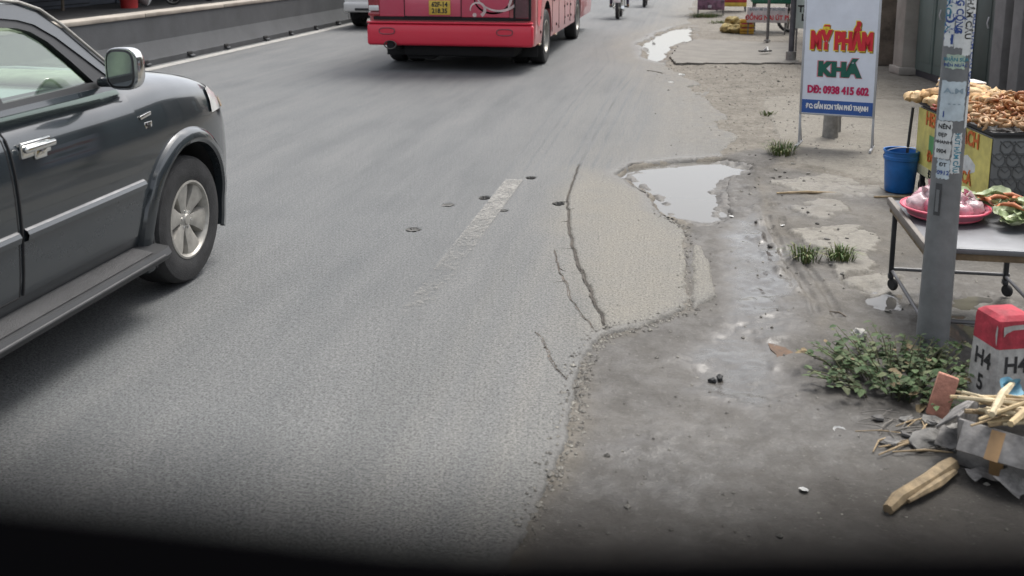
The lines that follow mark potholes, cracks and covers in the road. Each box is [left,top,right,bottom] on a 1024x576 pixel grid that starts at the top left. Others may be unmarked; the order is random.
crack [554,165,607,329]
pothole [635,25,700,64]
pothole [610,155,753,228]
crack [535,332,567,379]
